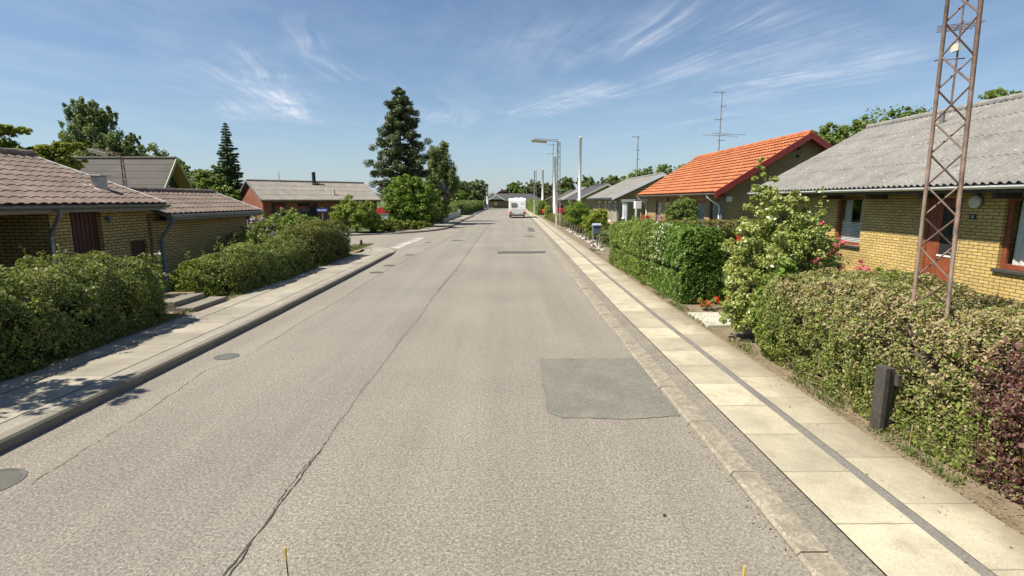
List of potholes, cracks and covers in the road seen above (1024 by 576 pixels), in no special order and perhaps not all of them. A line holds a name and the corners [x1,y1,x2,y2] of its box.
manhole cover [0,468,27,490]
